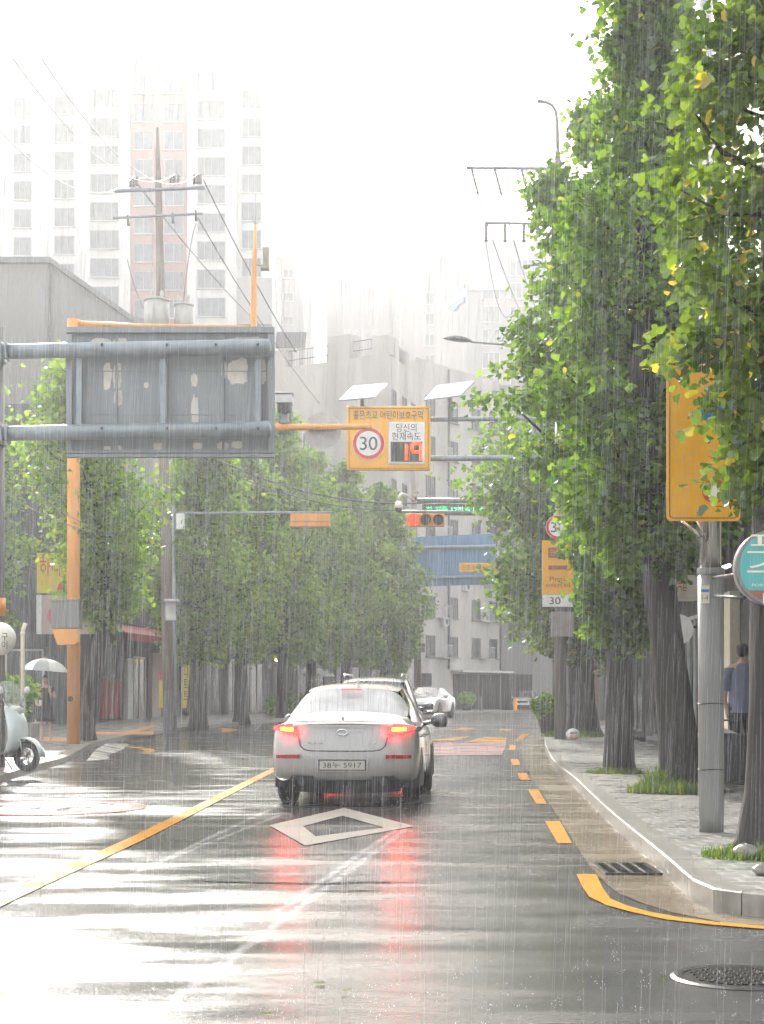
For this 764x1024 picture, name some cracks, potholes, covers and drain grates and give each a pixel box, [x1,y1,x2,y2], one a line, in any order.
drain grate [592,862,663,875]
manhole cover [670,964,764,991]
